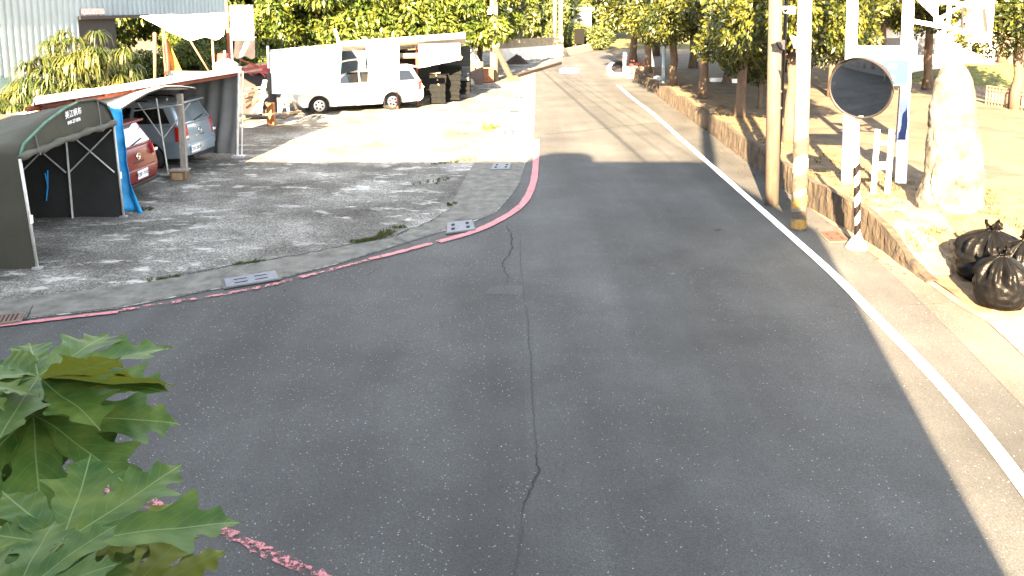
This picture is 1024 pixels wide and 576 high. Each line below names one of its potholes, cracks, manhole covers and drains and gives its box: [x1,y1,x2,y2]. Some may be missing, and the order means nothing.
crack [488,225,541,576]
manhole cover [819,231,849,243]
